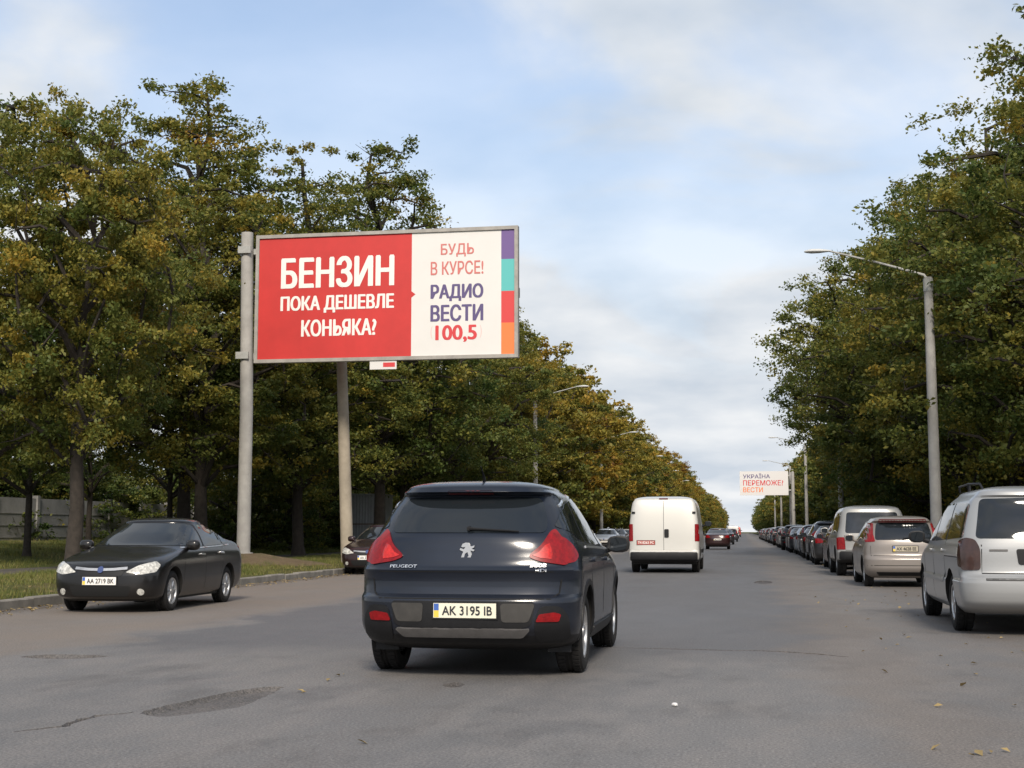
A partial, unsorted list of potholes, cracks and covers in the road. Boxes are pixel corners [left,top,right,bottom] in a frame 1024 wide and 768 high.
crack [15,712,132,732]
